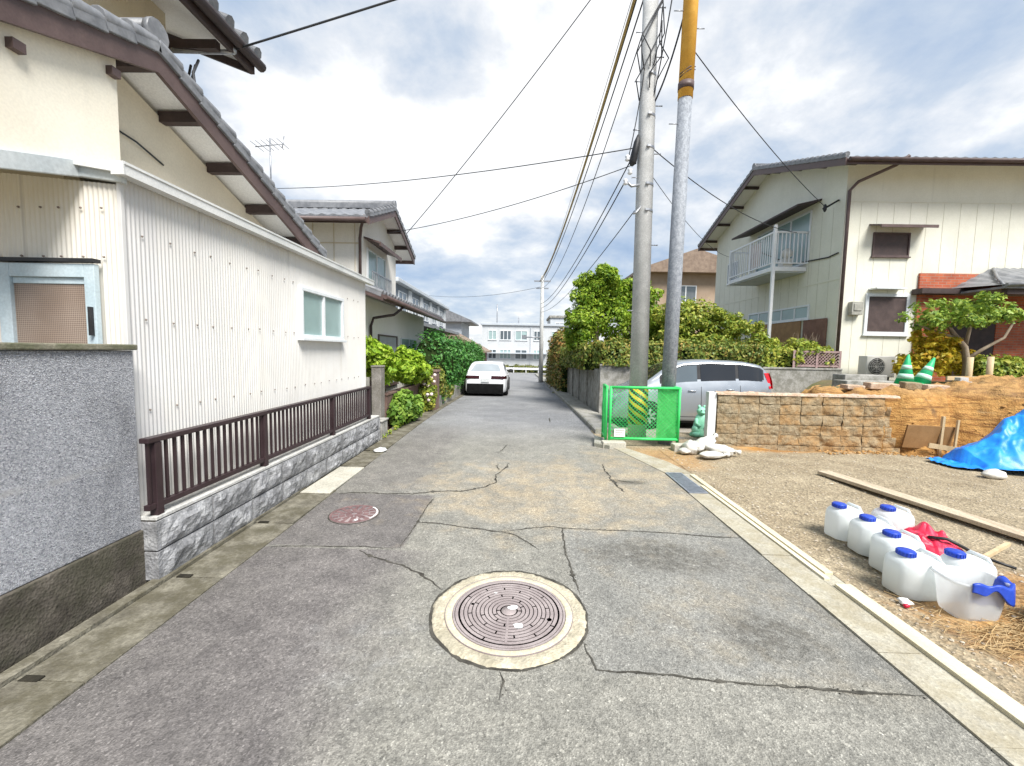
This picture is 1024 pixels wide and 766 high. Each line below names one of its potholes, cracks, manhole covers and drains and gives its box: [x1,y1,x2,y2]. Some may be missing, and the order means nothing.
crack [359,550,444,591]
crack [602,464,635,492]
crack [340,445,509,494]
manhole cover [429,570,589,671]
manhole cover [328,505,380,524]
drain grate [665,472,708,494]
